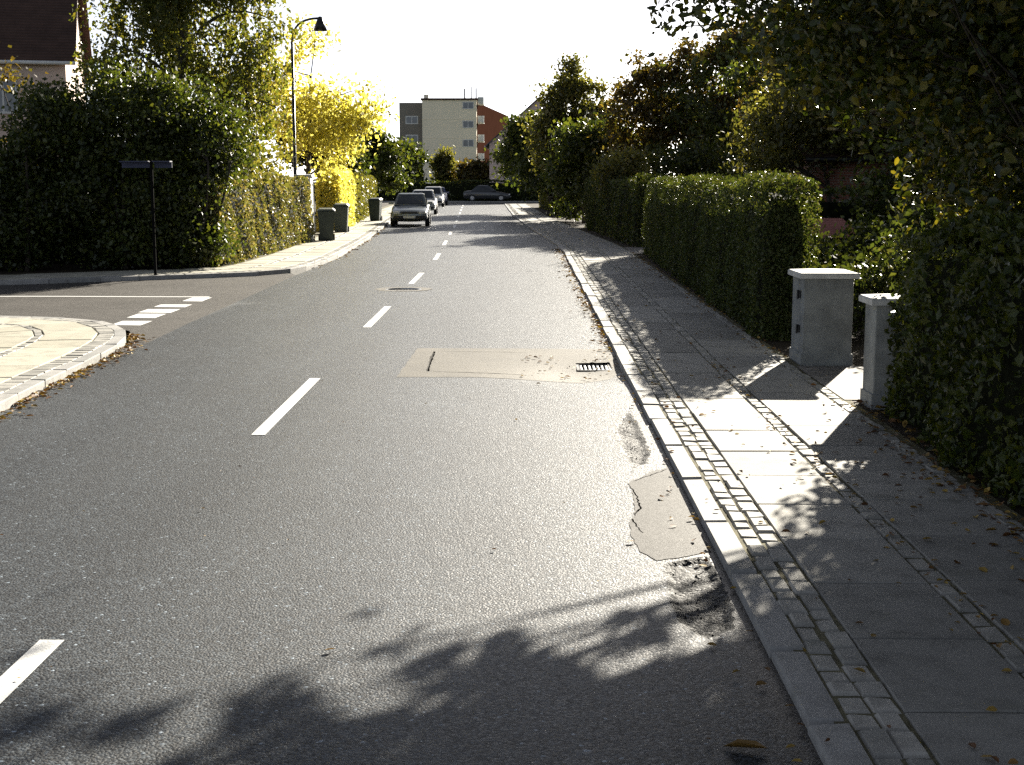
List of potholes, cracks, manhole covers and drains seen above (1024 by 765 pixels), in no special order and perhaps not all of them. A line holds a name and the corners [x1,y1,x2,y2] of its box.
pothole [662,556,736,639]
